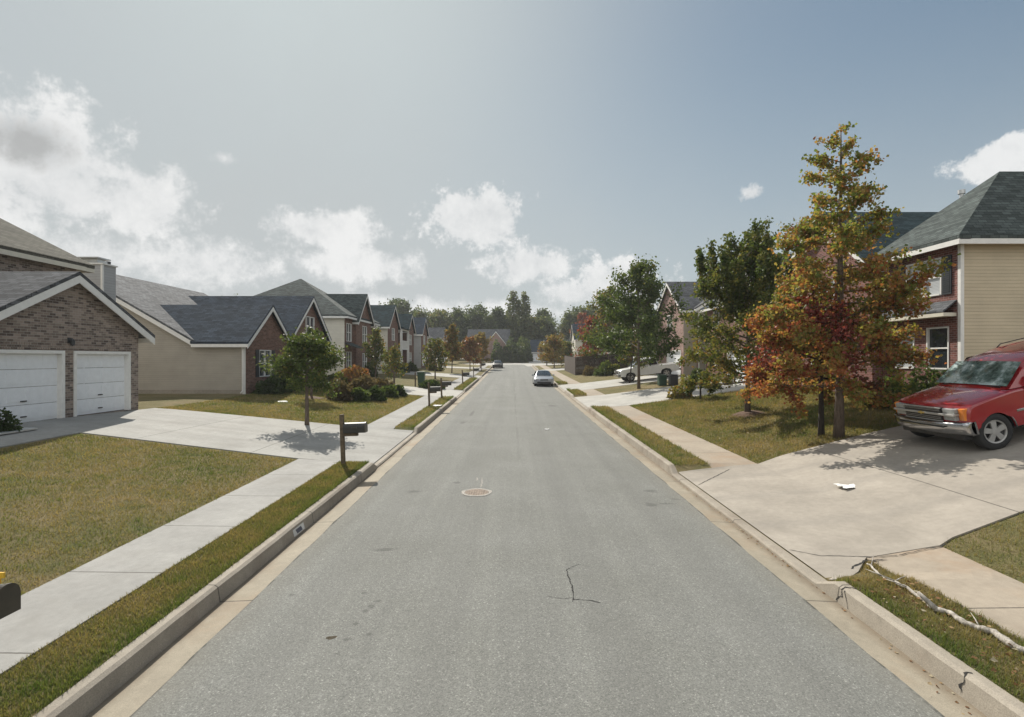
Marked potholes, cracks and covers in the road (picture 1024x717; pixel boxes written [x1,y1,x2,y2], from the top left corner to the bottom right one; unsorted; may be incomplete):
crack [550,564,601,603]
manhole cover [461,488,492,497]
